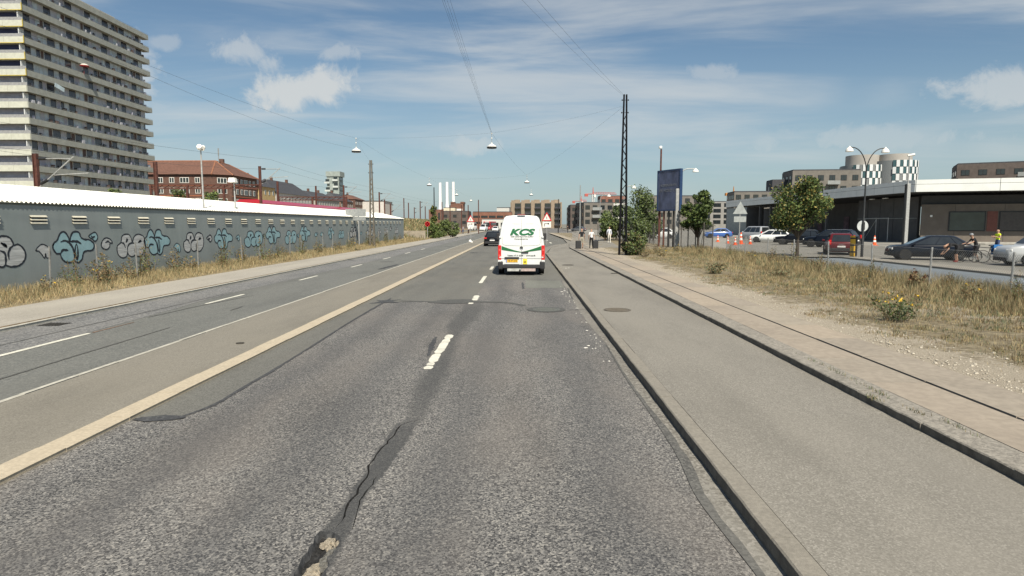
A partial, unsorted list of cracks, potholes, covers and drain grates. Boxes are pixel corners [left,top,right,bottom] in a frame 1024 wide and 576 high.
crack [336,421,413,529]
pothole [294,531,341,576]
